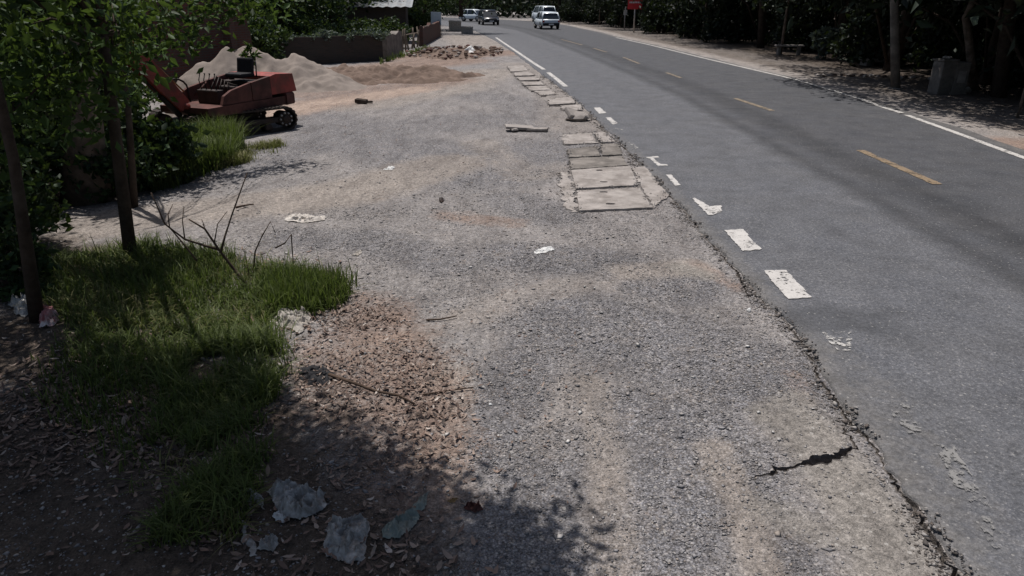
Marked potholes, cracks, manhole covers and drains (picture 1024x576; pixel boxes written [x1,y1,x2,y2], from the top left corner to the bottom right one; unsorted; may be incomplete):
manhole cover [577,187,653,213]
manhole cover [571,166,638,190]
crack [749,323,959,576]
